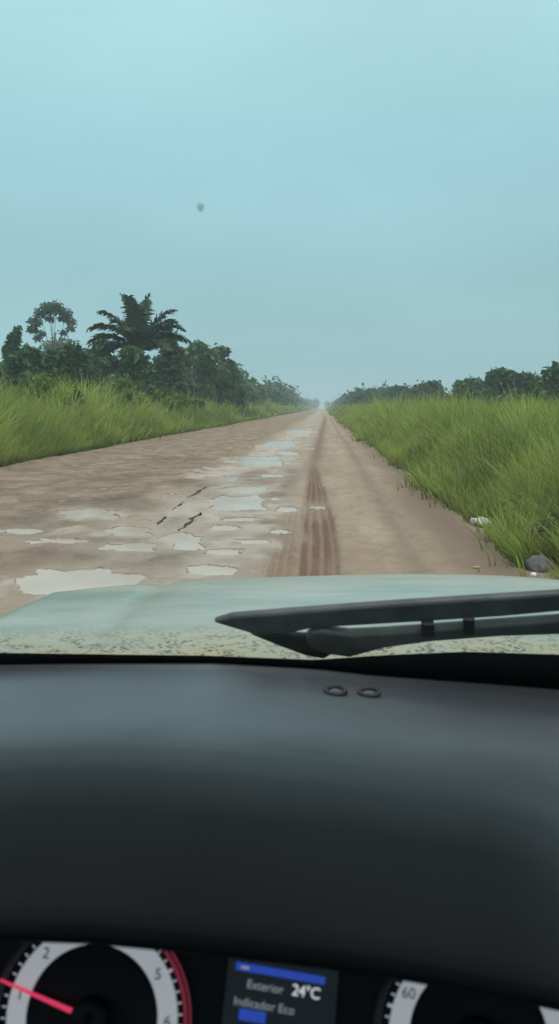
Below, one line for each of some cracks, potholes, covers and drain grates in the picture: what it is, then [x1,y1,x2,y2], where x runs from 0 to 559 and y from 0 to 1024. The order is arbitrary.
crack [156,487,206,531]
pothole [206,495,268,511]
pothole [15,567,148,595]
pothole [186,564,239,575]
pothole [238,456,284,467]
pothole [157,531,206,550]
pothole [102,525,153,536]
pothole [24,536,90,544]
pothole [94,542,158,552]
pothole [59,509,121,518]
